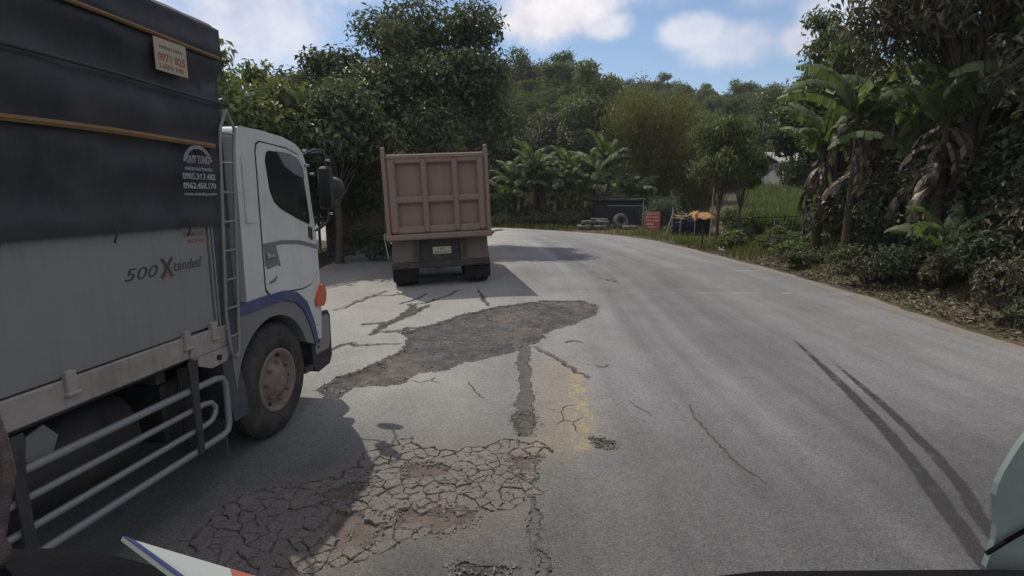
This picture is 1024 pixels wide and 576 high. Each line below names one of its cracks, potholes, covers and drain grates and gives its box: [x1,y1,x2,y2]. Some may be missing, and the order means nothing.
crack [332,290,460,351]
pothole [313,299,600,400]
crack [689,404,768,484]
pothole [442,557,523,576]
pothole [584,434,622,451]
crack [164,405,580,576]
crack [512,341,610,414]
